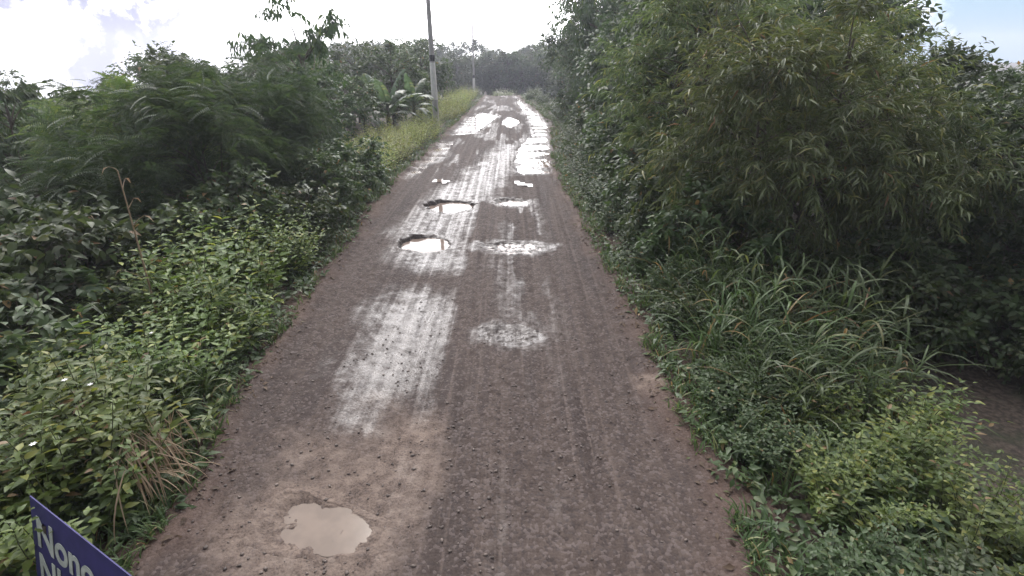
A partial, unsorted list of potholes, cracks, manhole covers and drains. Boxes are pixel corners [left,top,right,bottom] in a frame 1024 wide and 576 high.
pothole [392,233,458,256]
pothole [469,239,558,257]
pothole [243,486,402,564]
pothole [487,197,532,208]
pothole [500,116,521,129]
pothole [466,318,556,351]
pothole [417,198,484,215]
